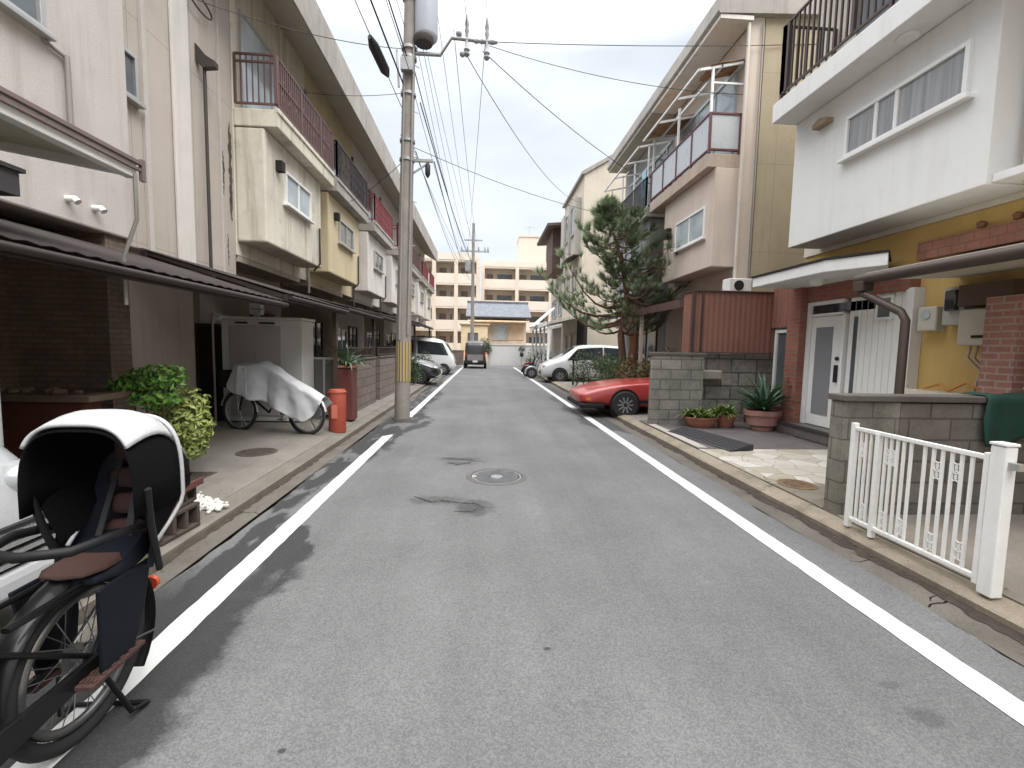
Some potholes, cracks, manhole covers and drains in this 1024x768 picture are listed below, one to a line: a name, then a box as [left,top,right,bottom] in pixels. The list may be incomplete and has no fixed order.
crack [928,595,948,608]
manhole cover [466,468,527,486]
manhole cover [235,448,278,457]
manhole cover [777,479,819,490]
